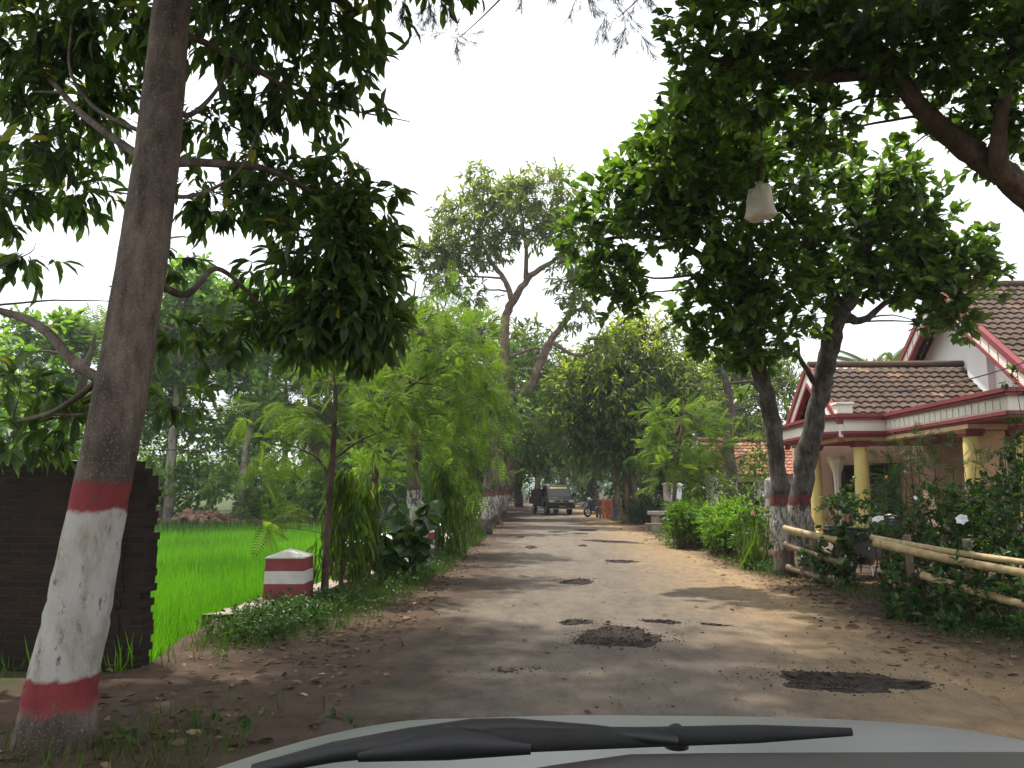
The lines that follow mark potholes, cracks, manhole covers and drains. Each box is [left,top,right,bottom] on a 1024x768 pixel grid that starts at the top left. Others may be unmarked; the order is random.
pothole [556,616,603,626]
pothole [738,665,970,697]
pothole [551,618,684,652]
pothole [549,577,598,586]
